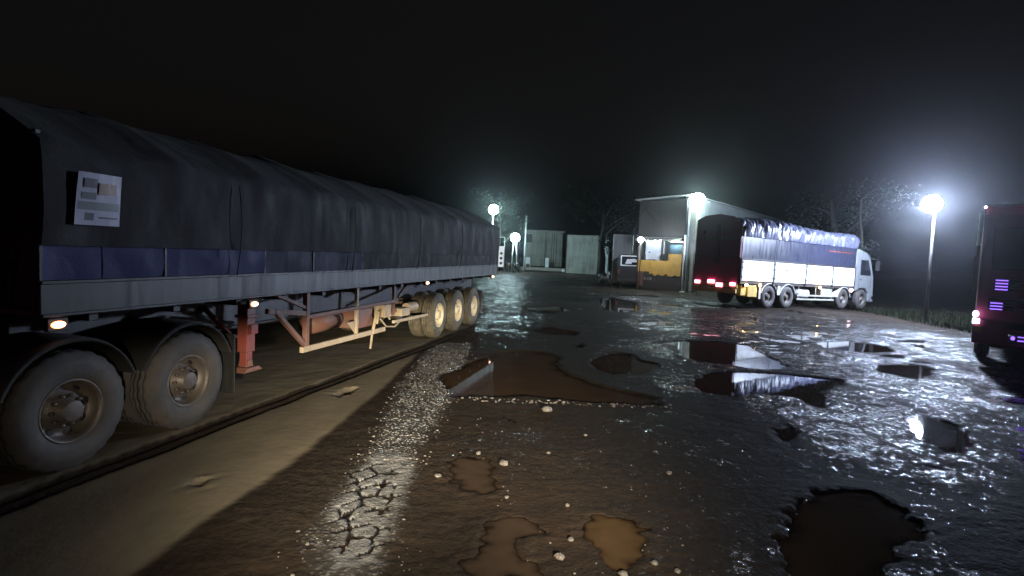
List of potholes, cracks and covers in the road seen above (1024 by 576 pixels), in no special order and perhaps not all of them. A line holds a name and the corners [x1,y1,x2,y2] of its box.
pothole [598,297,640,312]
pothole [656,339,791,370]
pothole [690,370,849,411]
pothole [434,349,663,407]
pothole [456,515,553,576]
pothole [770,488,935,576]
pothole [900,410,982,454]
pothole [873,363,944,381]
pothole [445,456,499,495]
crack [334,464,400,555]
pothole [769,423,805,445]
pothole [577,513,652,574]
